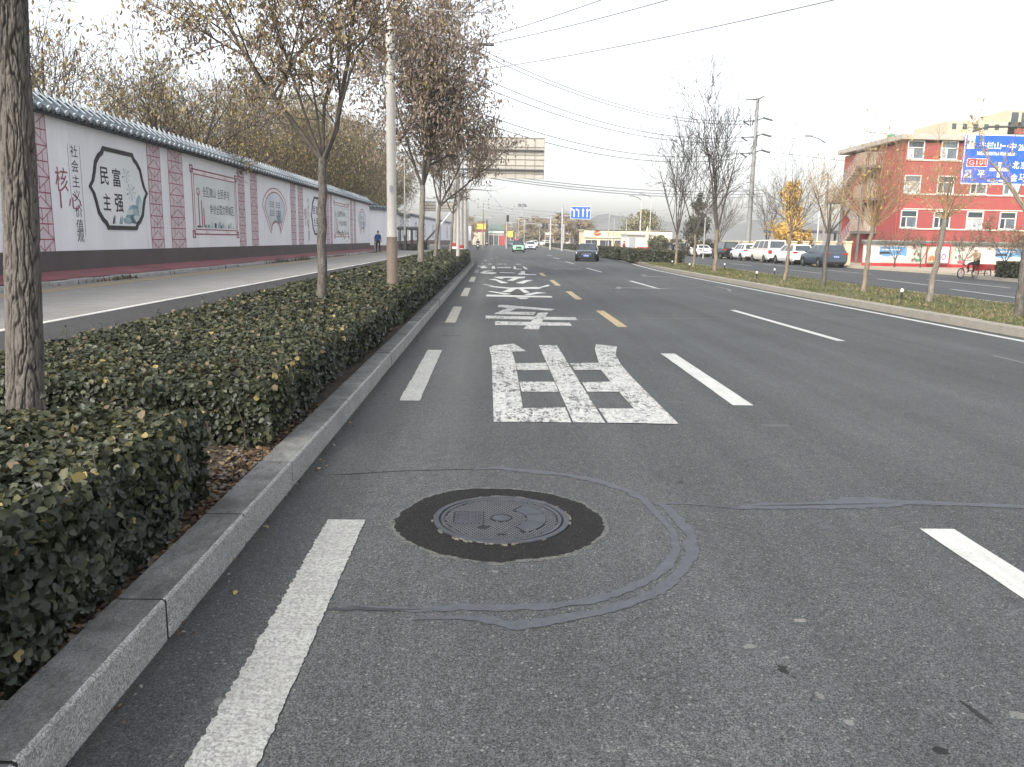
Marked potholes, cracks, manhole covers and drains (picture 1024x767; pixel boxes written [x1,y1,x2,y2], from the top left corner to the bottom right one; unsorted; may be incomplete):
manhole cover [431,495,571,546]
